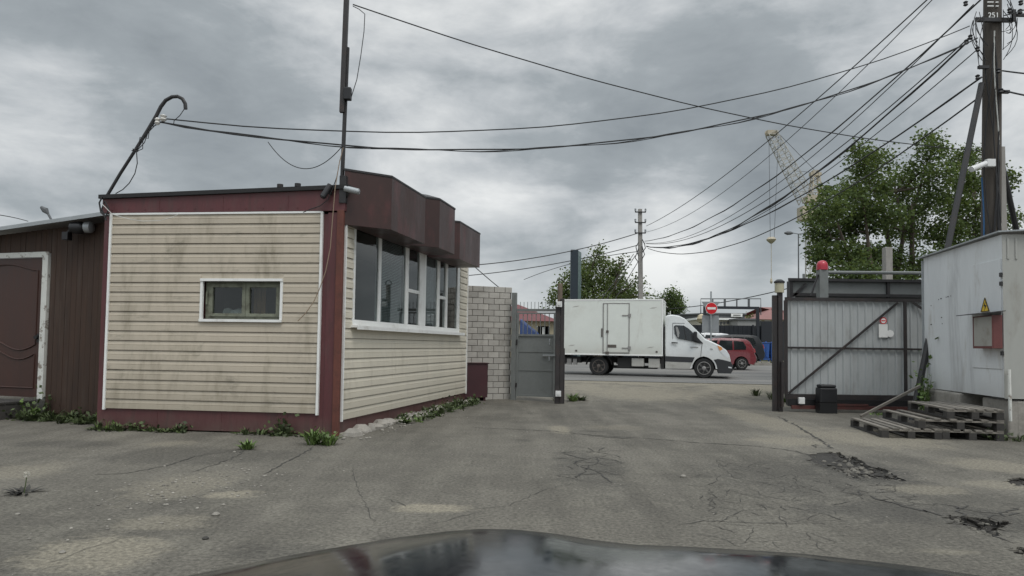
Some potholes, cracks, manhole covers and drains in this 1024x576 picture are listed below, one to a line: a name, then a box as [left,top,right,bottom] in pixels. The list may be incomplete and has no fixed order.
crack [683,458,1018,551]
crack [117,445,258,474]
pothole [806,452,906,481]
pothole [1003,477,1024,486]
pothole [941,515,1015,537]
crack [436,417,833,523]
